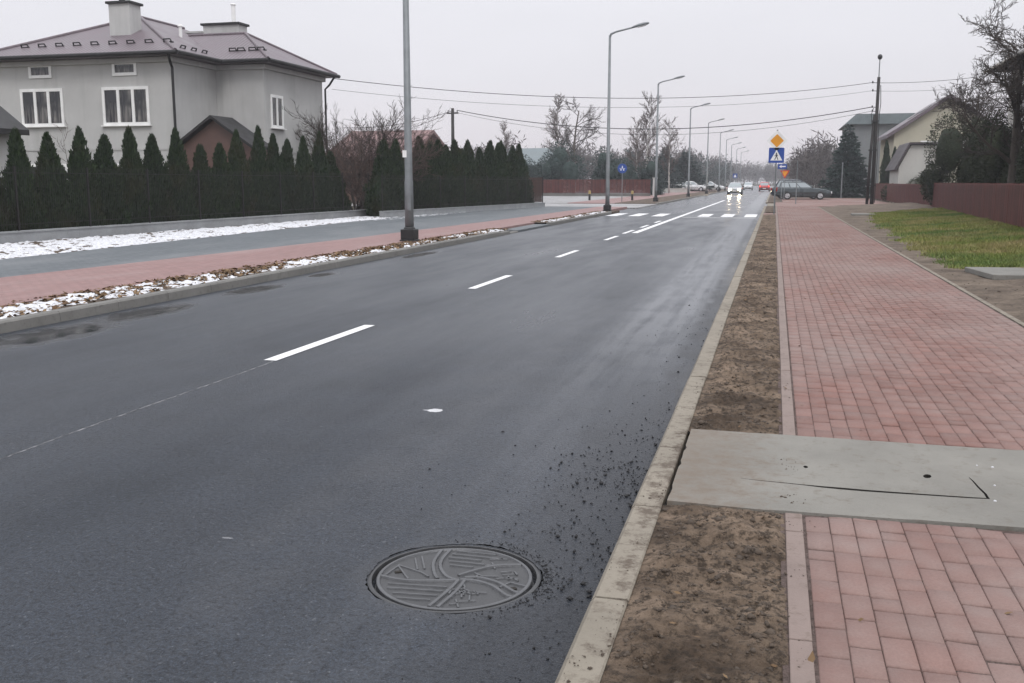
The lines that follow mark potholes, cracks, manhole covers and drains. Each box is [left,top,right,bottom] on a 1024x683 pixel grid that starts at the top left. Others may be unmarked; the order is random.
manhole cover [368,545,541,614]
